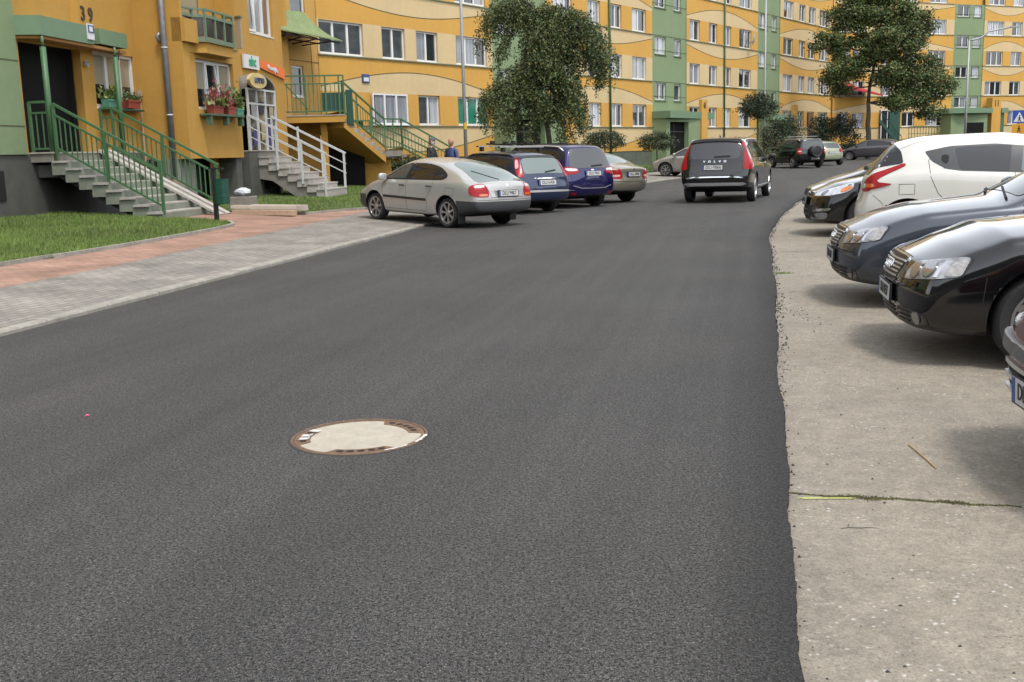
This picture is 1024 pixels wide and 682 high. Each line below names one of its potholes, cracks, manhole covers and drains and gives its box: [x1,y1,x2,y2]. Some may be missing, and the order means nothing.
manhole cover [288,419,430,456]
